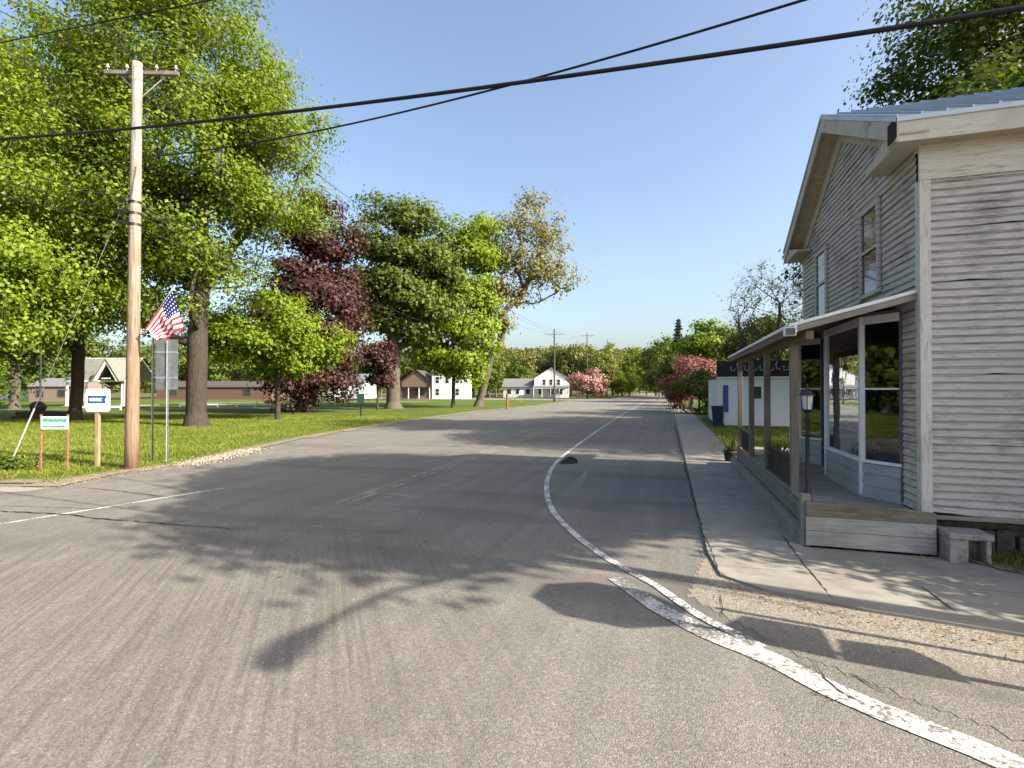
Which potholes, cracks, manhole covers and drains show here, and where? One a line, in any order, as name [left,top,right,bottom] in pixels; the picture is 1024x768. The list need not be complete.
crack [673,420,731,580]
crack [797,659,892,707]
